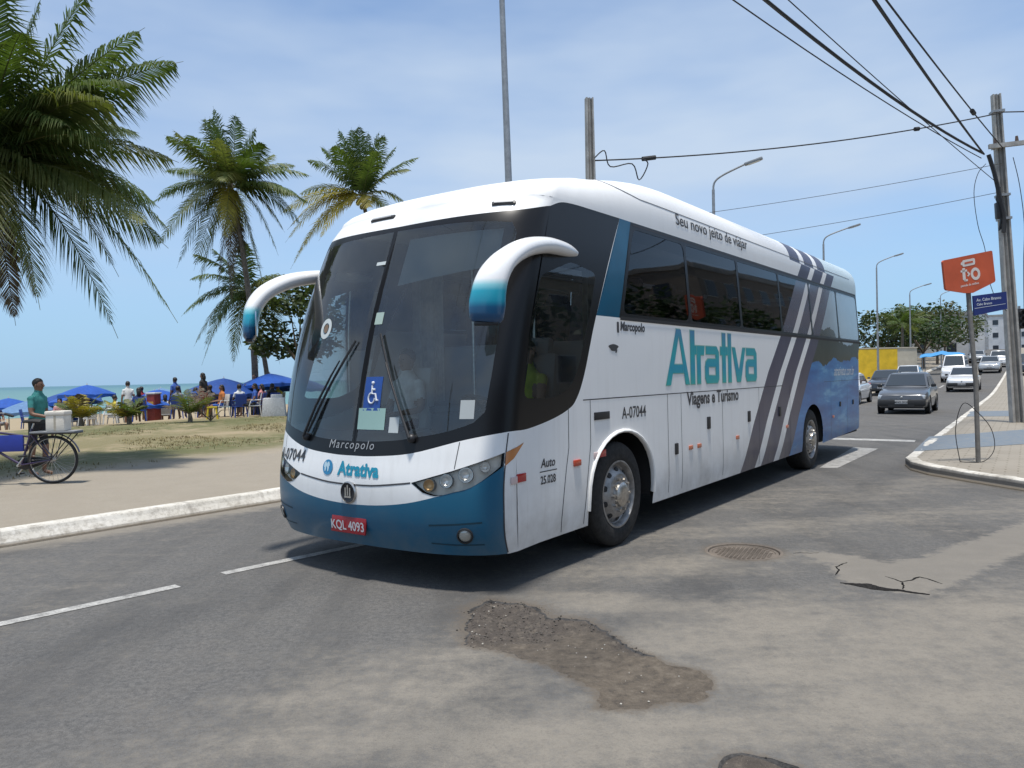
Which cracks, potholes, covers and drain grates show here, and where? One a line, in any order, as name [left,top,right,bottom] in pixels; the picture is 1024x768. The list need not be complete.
crack [793,552,942,595]
pothole [456,599,714,710]
manhole cover [705,543,783,561]
pothole [718,753,799,768]
